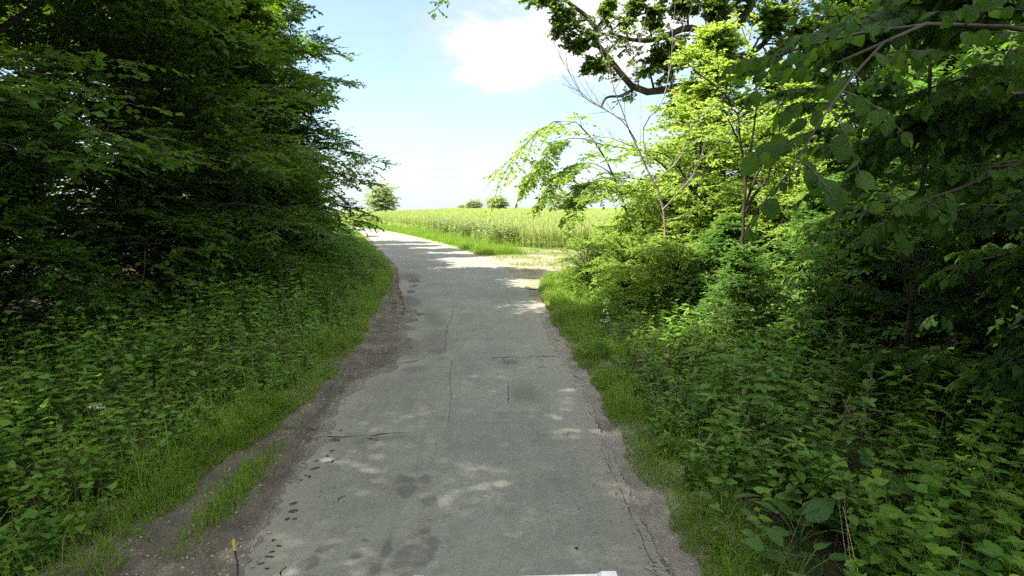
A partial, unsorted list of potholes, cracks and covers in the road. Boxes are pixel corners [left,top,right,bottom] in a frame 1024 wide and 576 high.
crack [600,448,658,576]
